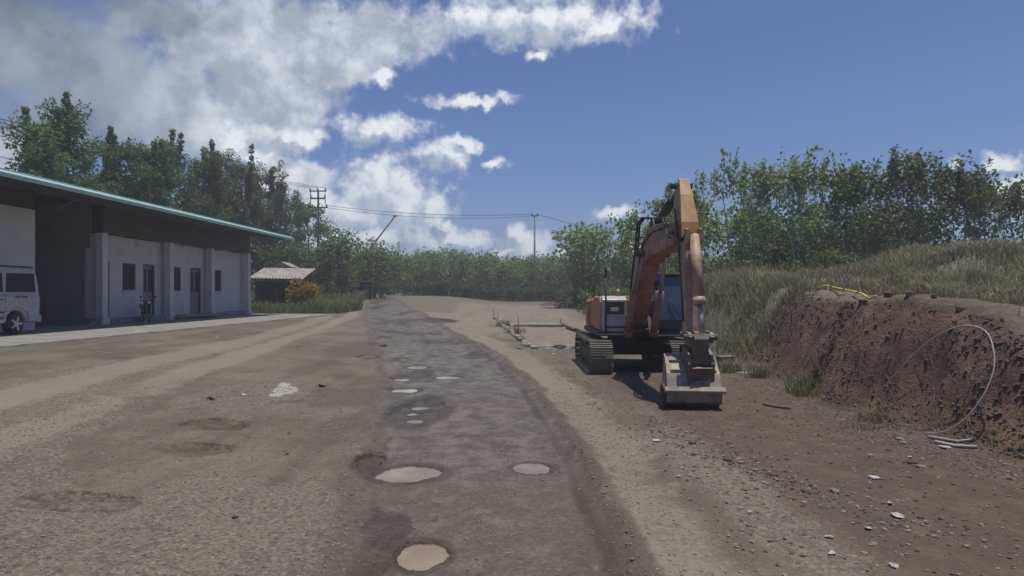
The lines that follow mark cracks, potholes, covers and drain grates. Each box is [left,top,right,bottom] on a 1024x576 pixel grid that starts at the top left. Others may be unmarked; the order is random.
pothole [159,416,264,435]
pothole [357,462,459,487]
pothole [347,451,394,477]
pothole [380,386,427,394]
pothole [366,393,456,437]
pothole [504,460,559,479]
pothole [1,487,166,518]
pothole [379,535,463,576]
pothole [146,439,253,459]
